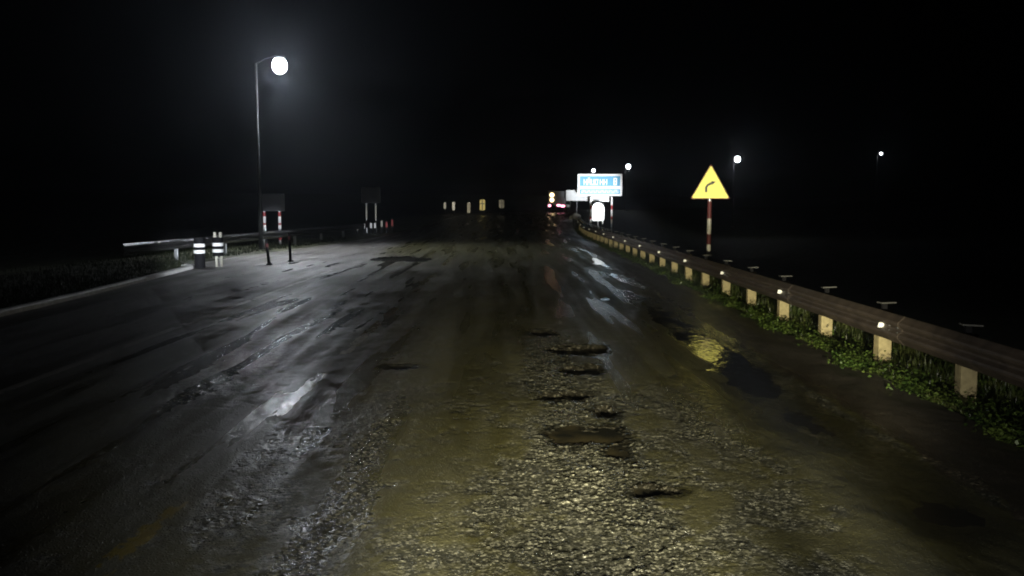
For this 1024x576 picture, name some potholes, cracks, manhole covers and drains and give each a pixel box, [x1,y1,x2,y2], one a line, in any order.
pothole [559,363,606,375]
pothole [630,482,688,498]
pothole [540,423,631,458]
pothole [526,329,558,338]
pothole [537,389,596,402]
pothole [545,344,610,357]
pothole [591,405,623,419]
